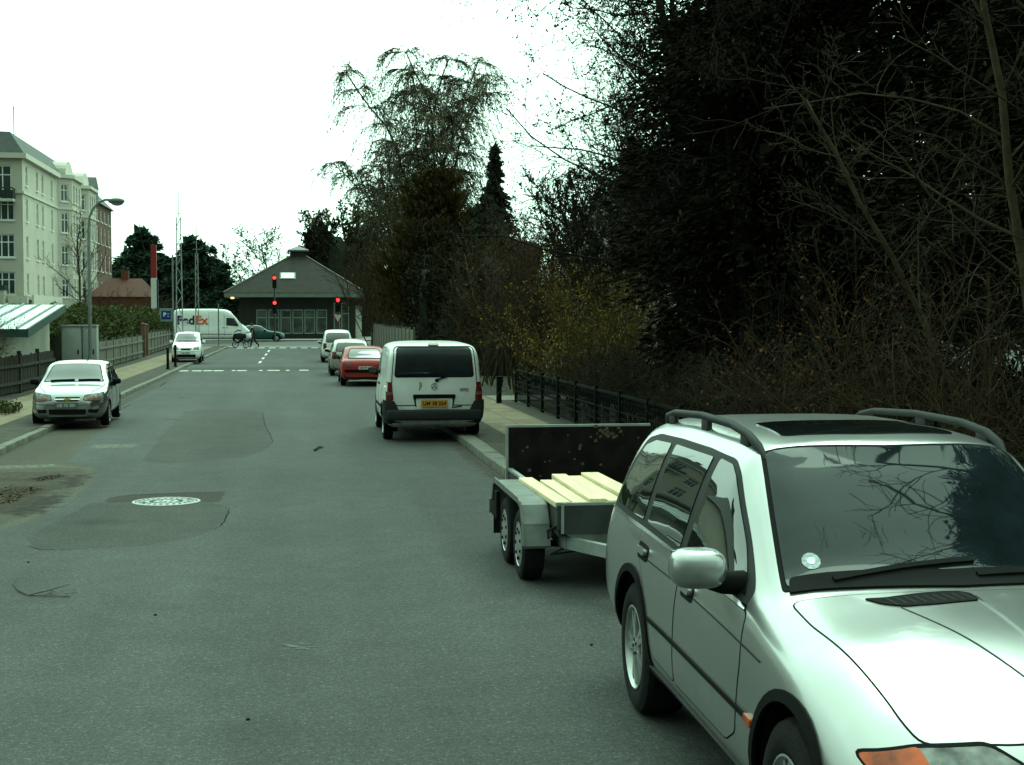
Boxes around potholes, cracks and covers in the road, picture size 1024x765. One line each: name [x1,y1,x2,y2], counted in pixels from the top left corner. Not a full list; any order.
pothole [0,485,45,504]
manhole cover [132,497,200,506]
